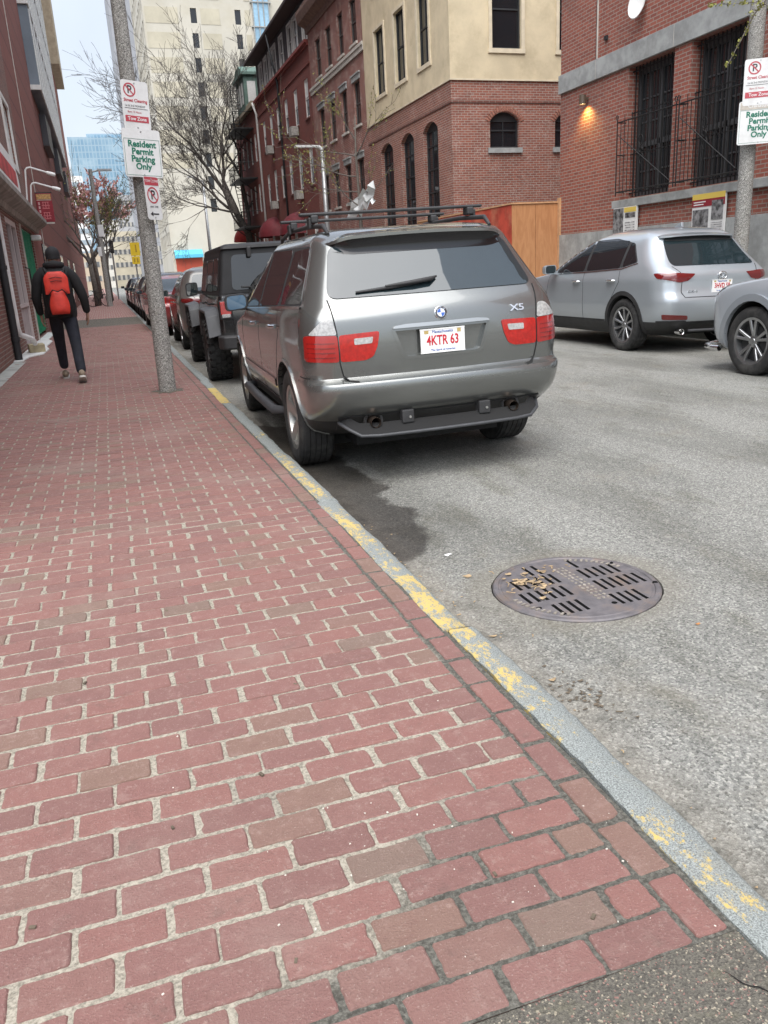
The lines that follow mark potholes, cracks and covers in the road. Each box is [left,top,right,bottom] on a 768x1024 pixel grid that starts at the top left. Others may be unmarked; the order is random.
manhole cover [492,557,662,623]
